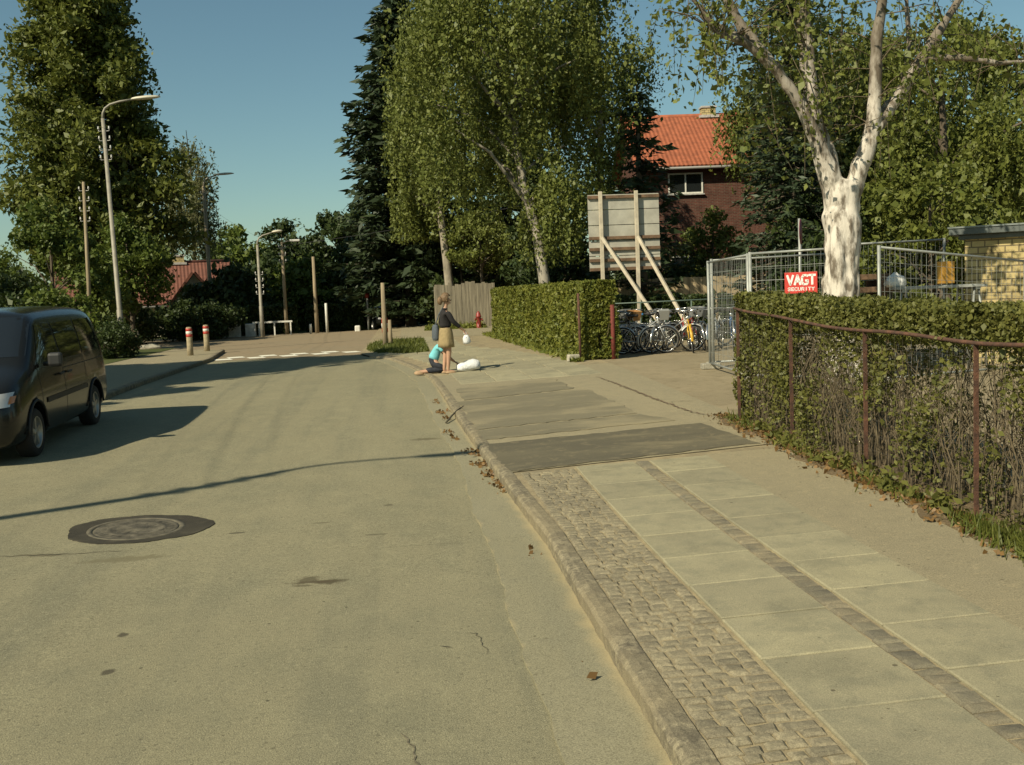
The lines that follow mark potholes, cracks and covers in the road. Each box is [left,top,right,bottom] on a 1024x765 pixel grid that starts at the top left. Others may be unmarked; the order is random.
manhole cover [68,515,215,545]
crack [401,733,420,765]
crack [596,376,708,415]
